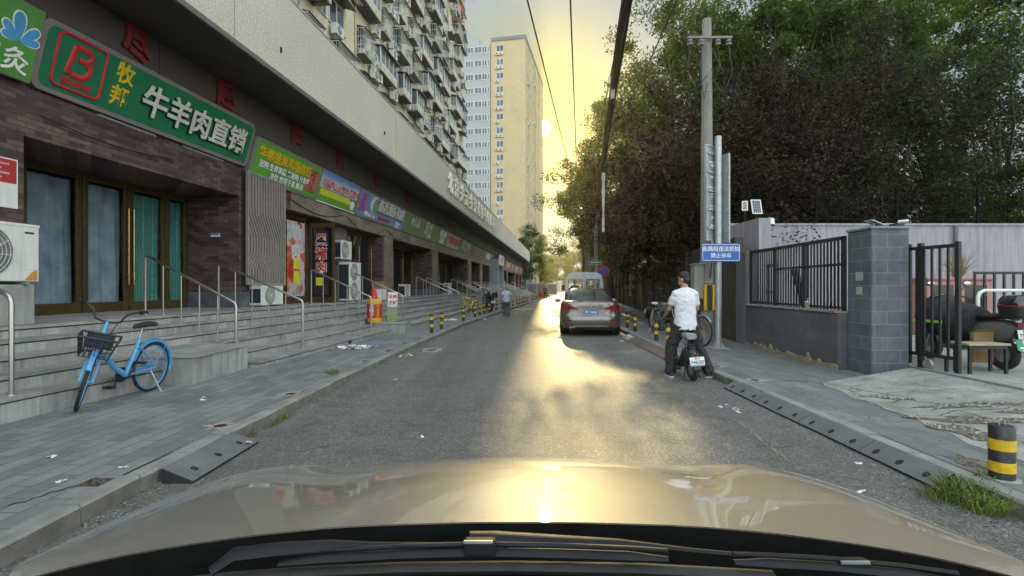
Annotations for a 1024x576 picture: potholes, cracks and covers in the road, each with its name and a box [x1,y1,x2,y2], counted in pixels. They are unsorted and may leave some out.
crack [732,419,791,461]
pothole [74,478,114,487]
